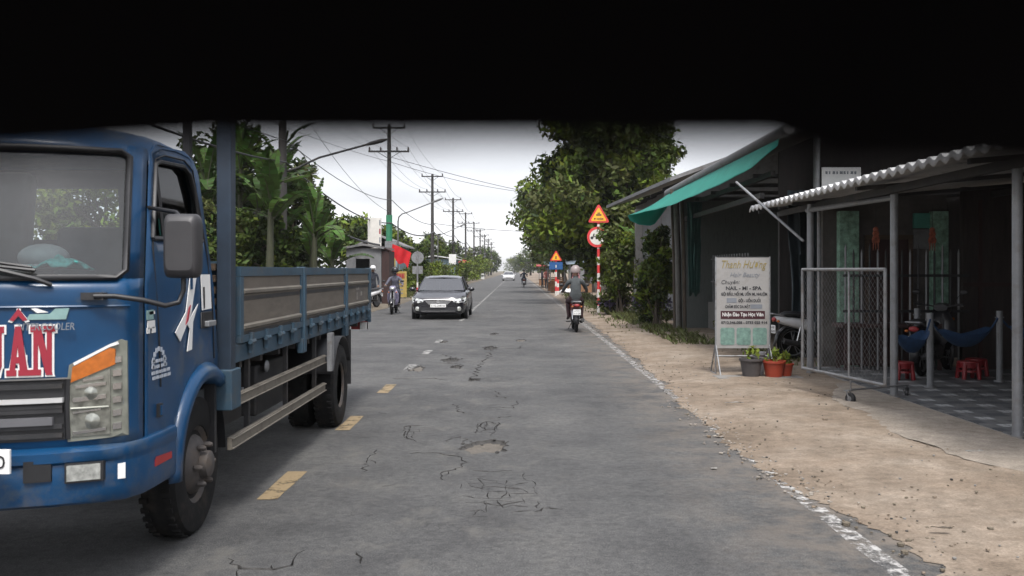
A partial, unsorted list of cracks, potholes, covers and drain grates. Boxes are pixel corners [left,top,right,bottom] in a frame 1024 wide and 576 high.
pothole [459,439,509,454]
crack [393,335,520,380]
crack [403,391,562,517]
crack [228,550,304,576]
